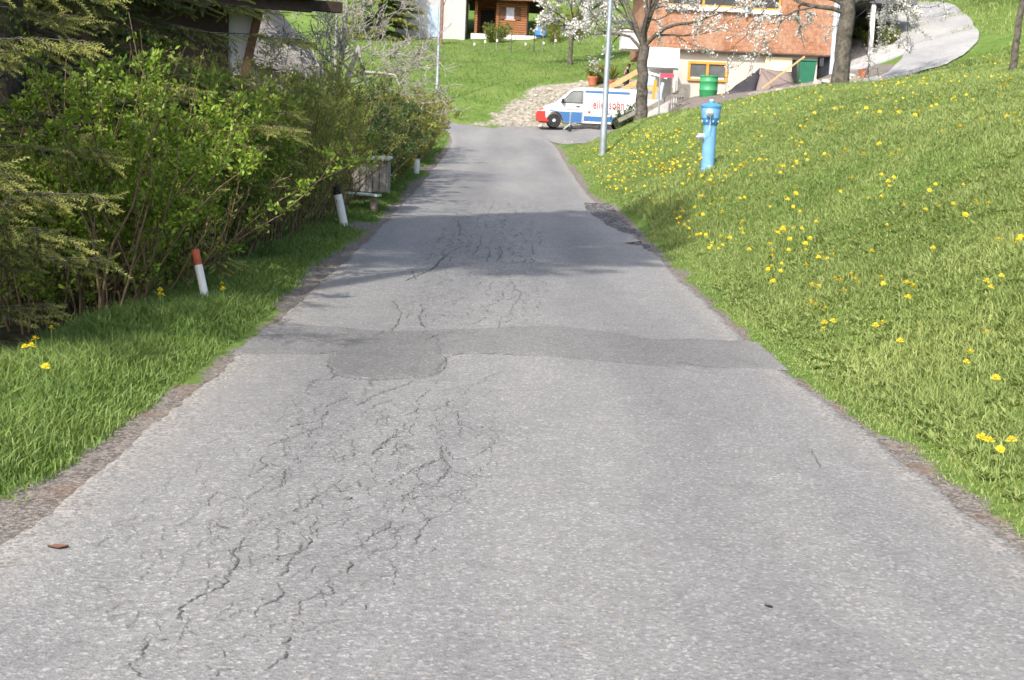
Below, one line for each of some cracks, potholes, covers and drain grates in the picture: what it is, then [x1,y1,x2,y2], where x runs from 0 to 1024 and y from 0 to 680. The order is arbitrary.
crack [306,201,554,354]
crack [96,369,507,680]
